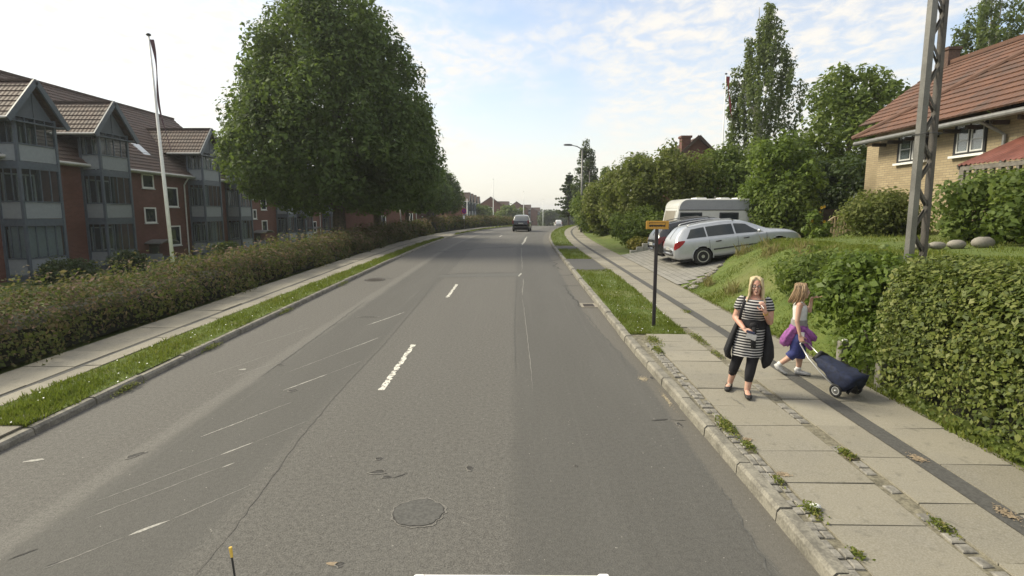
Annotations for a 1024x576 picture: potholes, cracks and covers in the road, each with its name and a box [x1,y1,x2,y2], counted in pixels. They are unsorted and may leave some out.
manhole cover [390,498,448,528]
